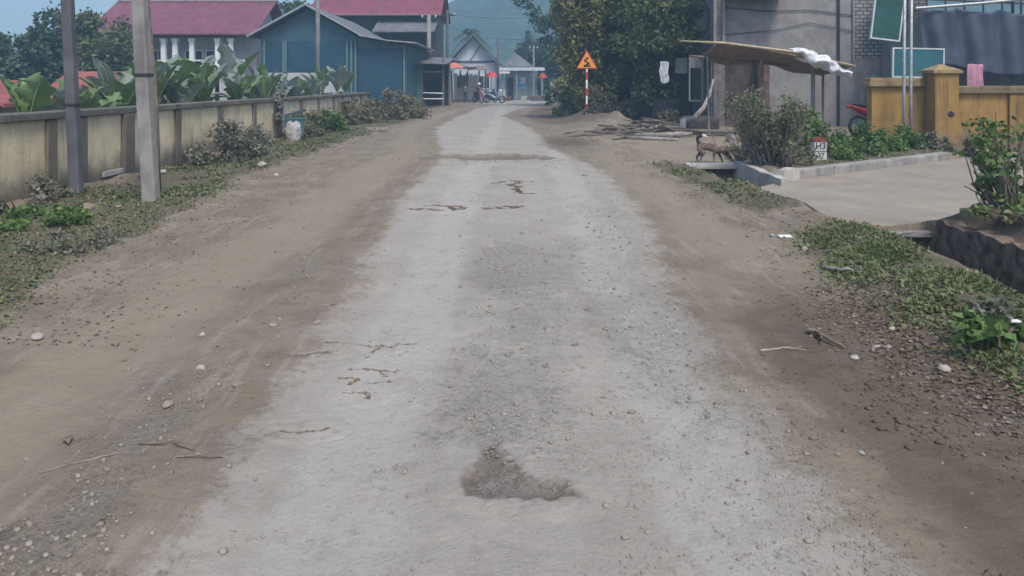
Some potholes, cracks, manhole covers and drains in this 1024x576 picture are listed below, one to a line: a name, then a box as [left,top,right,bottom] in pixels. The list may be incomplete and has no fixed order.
crack [256,337,436,446]
crack [398,179,542,213]
pothole [425,429,614,521]
